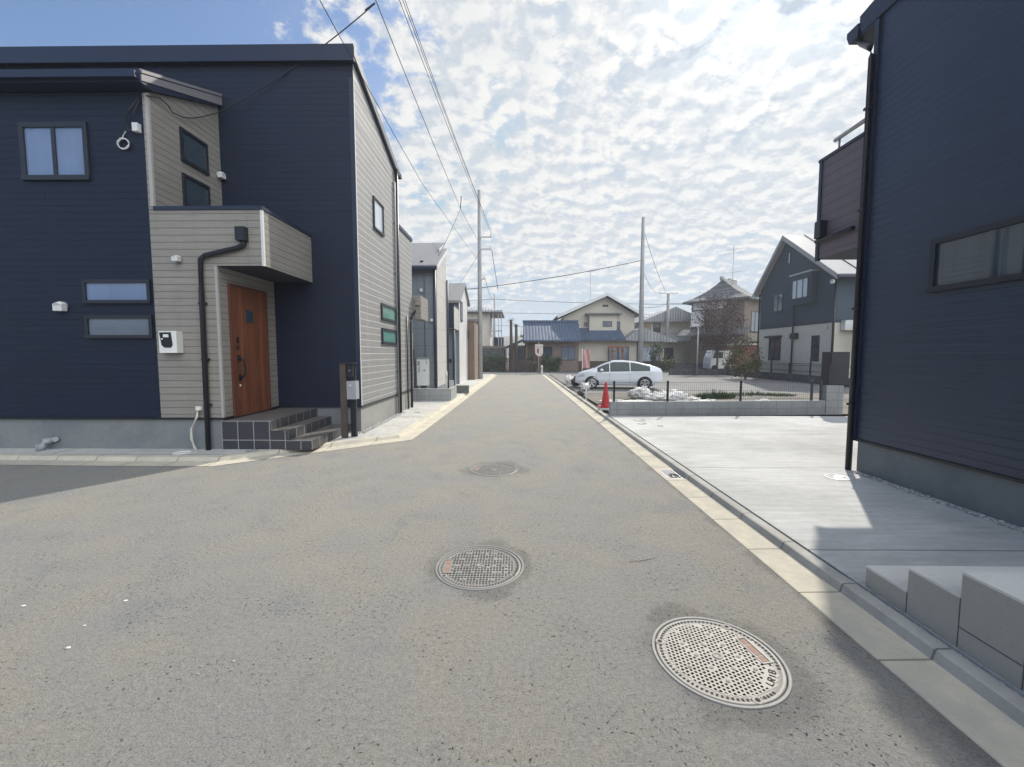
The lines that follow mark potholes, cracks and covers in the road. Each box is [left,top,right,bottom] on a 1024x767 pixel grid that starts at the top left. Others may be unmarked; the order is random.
drain grate [658,470,682,479]
manhole cover [435,545,524,591]
manhole cover [470,463,518,477]
manhole cover [651,616,793,710]
